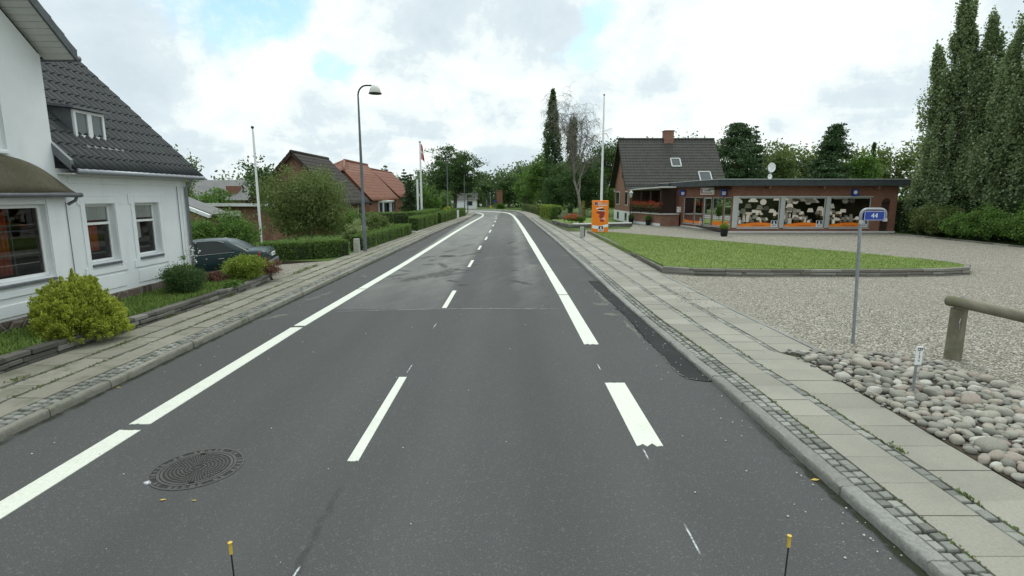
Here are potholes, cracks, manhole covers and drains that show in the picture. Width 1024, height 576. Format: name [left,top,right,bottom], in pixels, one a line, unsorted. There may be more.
manhole cover [147,448,245,491]
